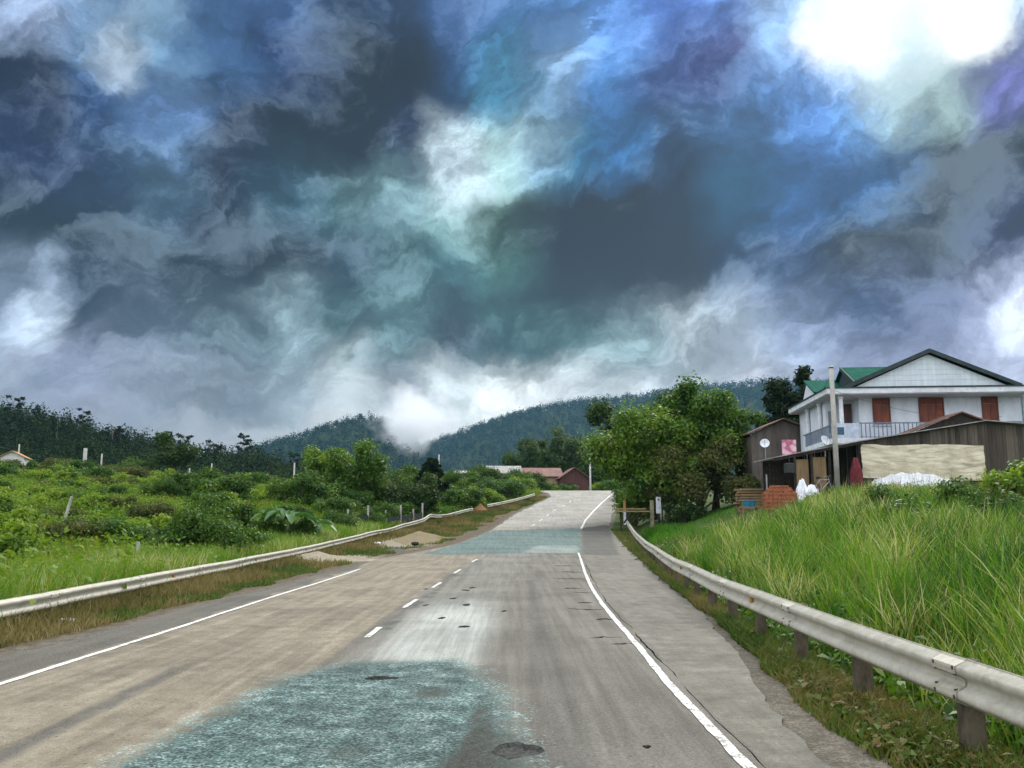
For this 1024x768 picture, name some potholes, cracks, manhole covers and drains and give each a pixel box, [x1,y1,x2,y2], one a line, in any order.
pothole [491,742,545,760]
